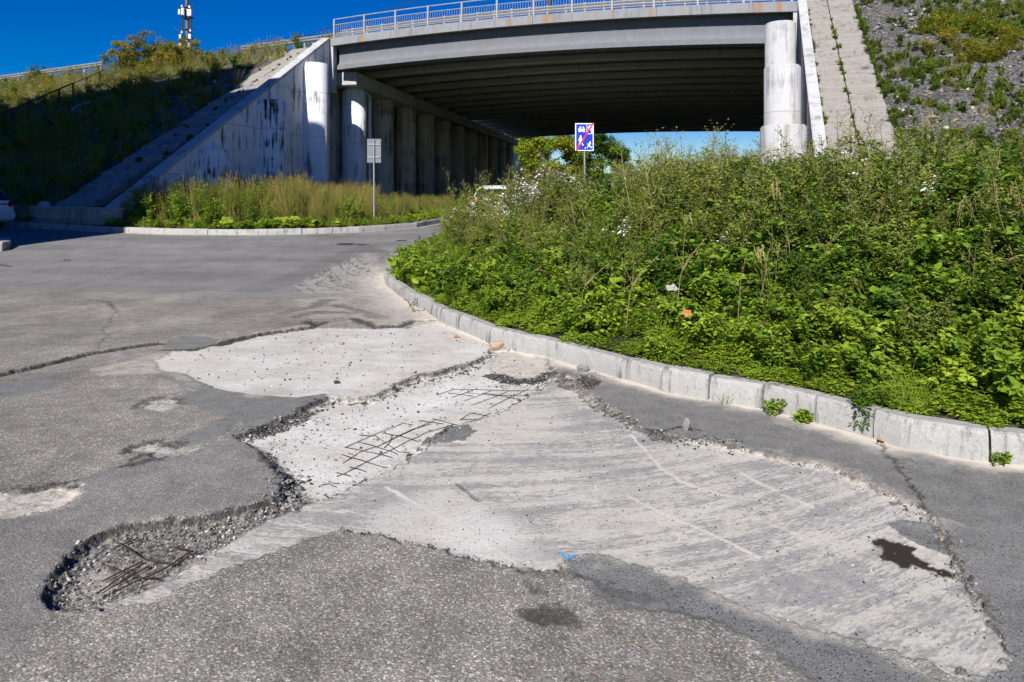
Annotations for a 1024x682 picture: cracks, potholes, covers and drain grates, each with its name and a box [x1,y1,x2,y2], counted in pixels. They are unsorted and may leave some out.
pothole [228,347,560,505]
pothole [29,483,308,620]
pothole [98,372,1015,678]
crack [0,299,438,377]
